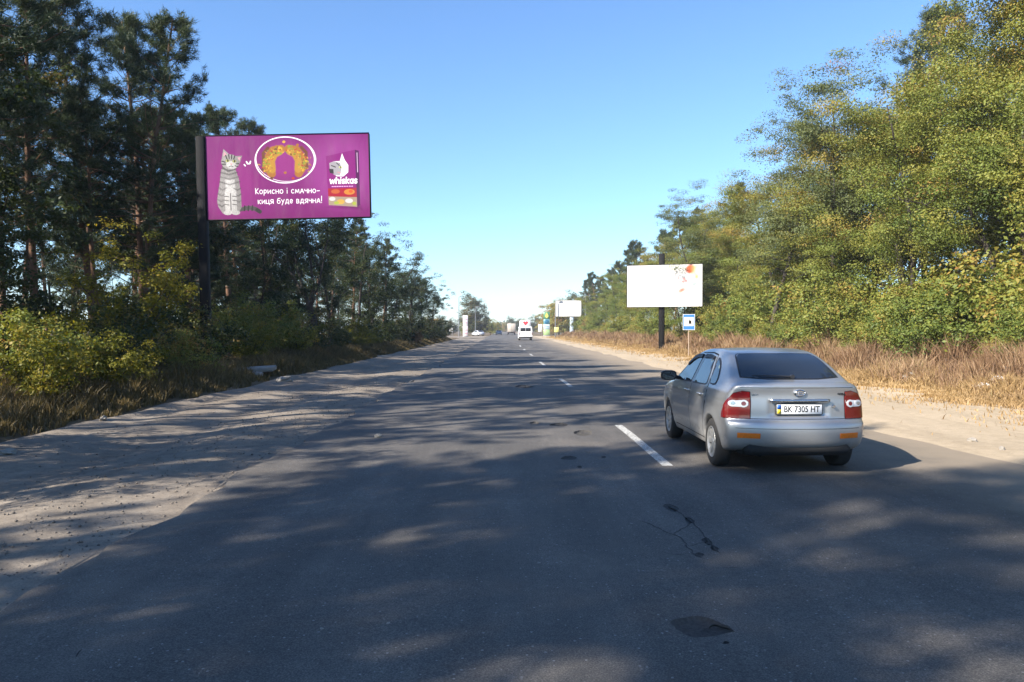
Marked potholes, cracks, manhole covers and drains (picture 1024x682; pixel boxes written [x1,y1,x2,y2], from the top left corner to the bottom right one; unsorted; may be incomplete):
crack [642,506,737,568]
pothole [670,616,735,638]
